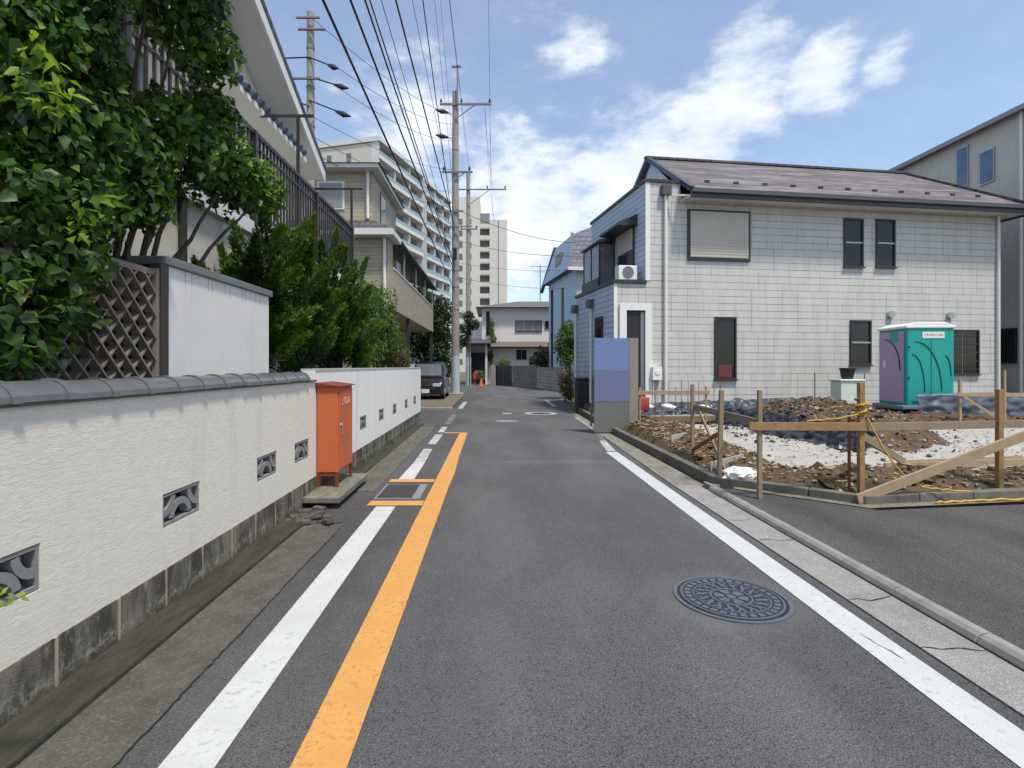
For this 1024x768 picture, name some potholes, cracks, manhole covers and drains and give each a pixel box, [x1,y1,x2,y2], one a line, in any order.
manhole cover [673,576,794,625]
